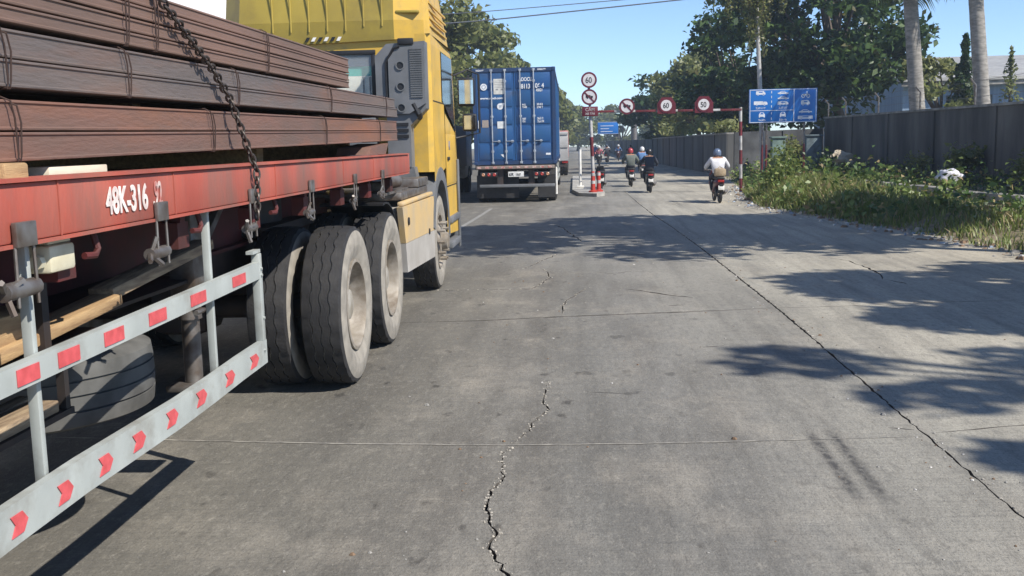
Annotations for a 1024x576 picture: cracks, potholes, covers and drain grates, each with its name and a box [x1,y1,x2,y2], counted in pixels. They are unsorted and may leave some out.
crack [482,383,552,576]
crack [437,225,582,291]
